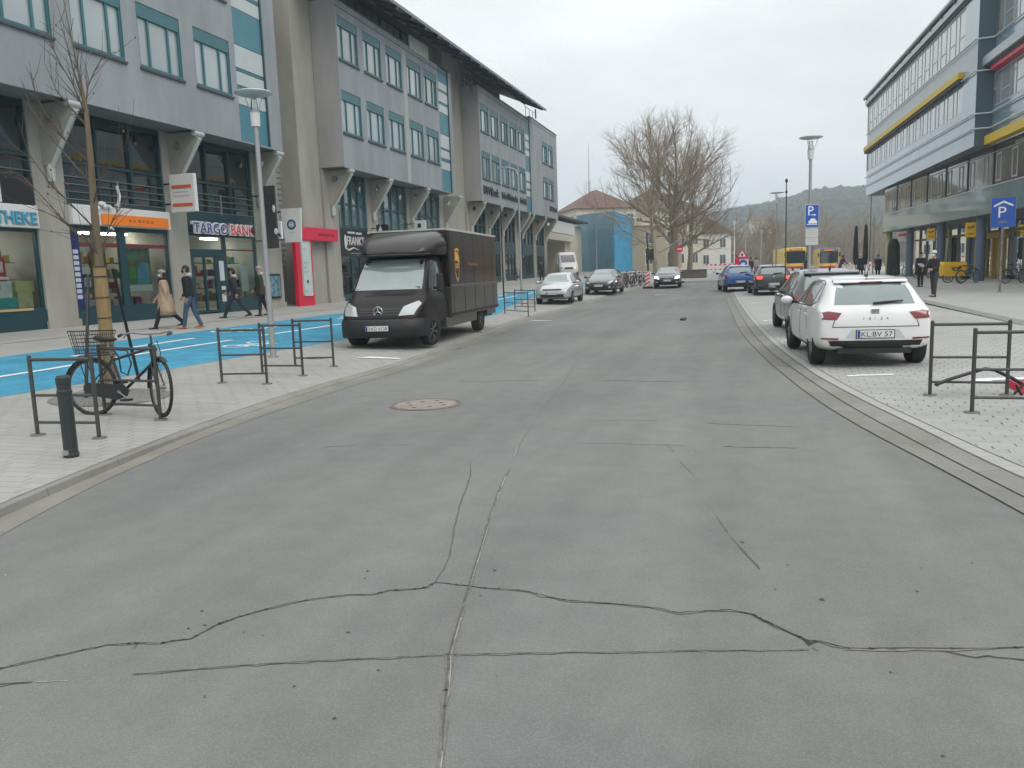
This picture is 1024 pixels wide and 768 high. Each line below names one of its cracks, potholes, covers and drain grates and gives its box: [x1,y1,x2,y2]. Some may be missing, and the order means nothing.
crack [0,355,1024,768]
manhole cover [389,398,462,410]
